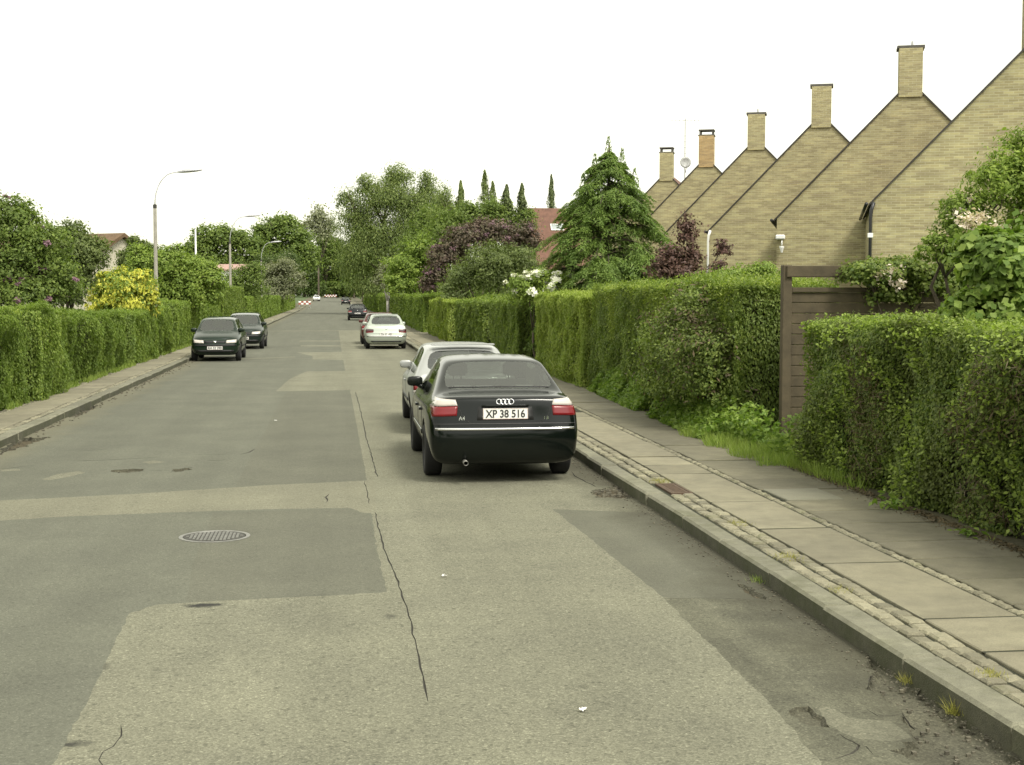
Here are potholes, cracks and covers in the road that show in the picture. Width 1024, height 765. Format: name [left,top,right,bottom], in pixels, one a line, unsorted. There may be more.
manhole cover [179,530,250,543]
crack [831,735,873,760]
crack [867,677,915,730]
crack [98,727,122,765]
